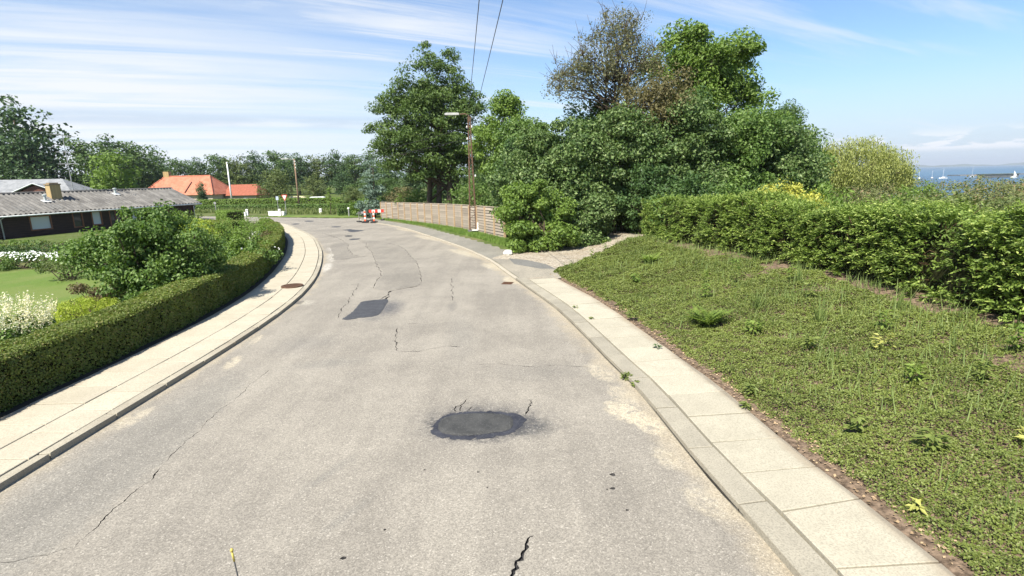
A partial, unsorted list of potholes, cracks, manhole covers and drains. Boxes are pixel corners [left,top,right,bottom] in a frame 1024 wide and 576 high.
crack [0,370,269,563]
crack [510,536,533,576]
crack [323,233,422,318]
